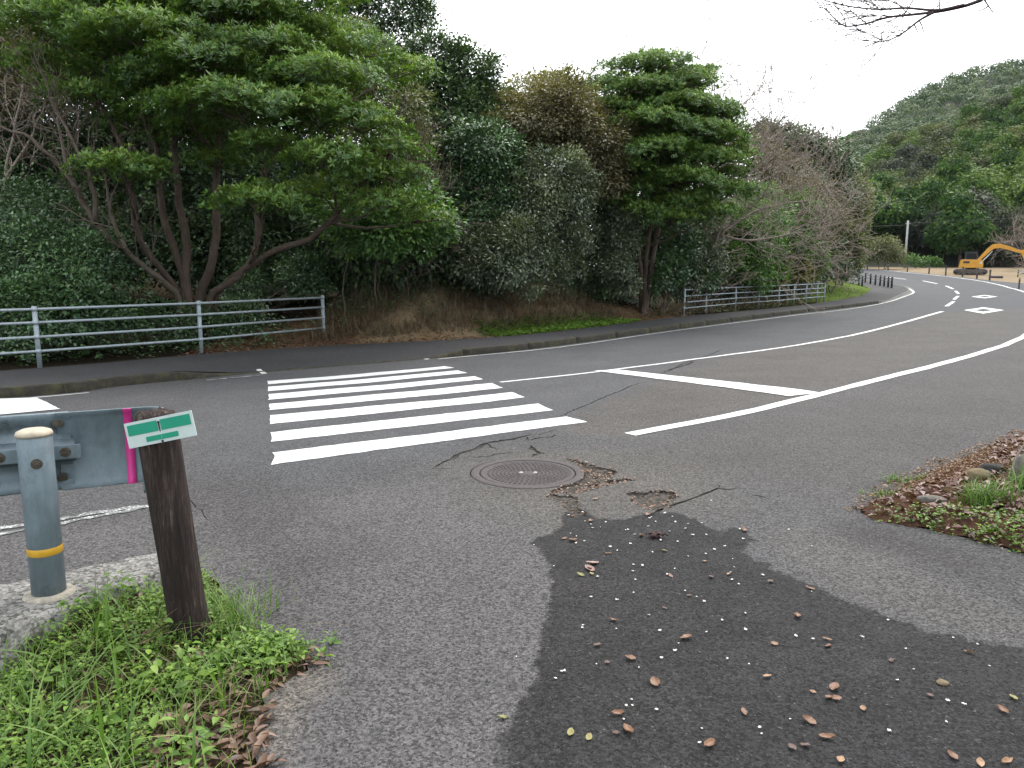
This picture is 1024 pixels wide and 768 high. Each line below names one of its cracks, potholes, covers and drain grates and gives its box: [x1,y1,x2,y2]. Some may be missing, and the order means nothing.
crack [433,382,643,469]
crack [644,486,768,519]
pothole [626,491,676,511]
pothole [551,459,634,493]
manhole cover [471,458,585,489]
